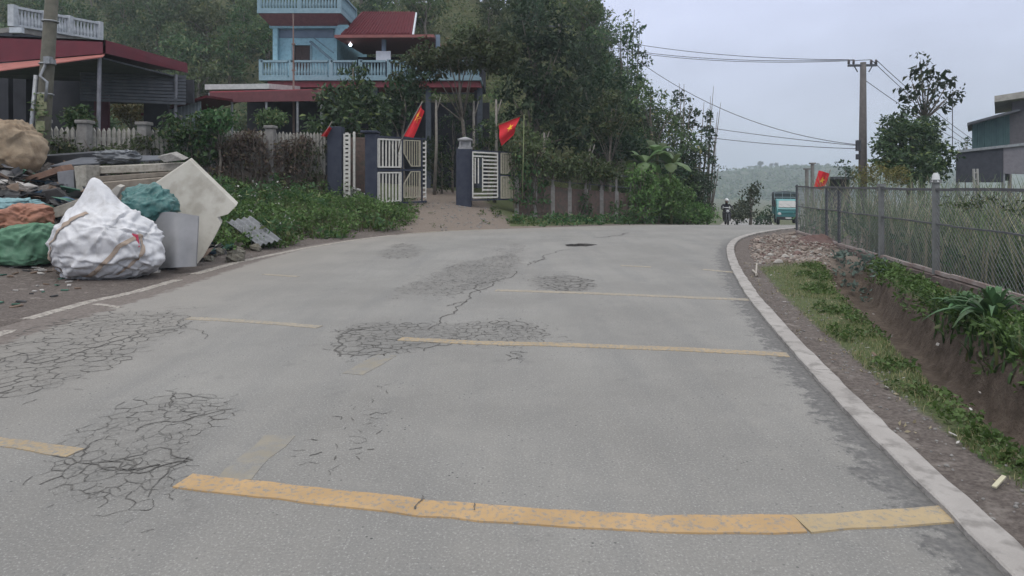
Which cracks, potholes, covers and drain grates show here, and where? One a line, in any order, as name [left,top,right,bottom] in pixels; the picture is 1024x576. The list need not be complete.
crack [308,244,595,362]
crack [22,388,245,533]
crack [0,305,208,405]
crack [294,384,388,473]
